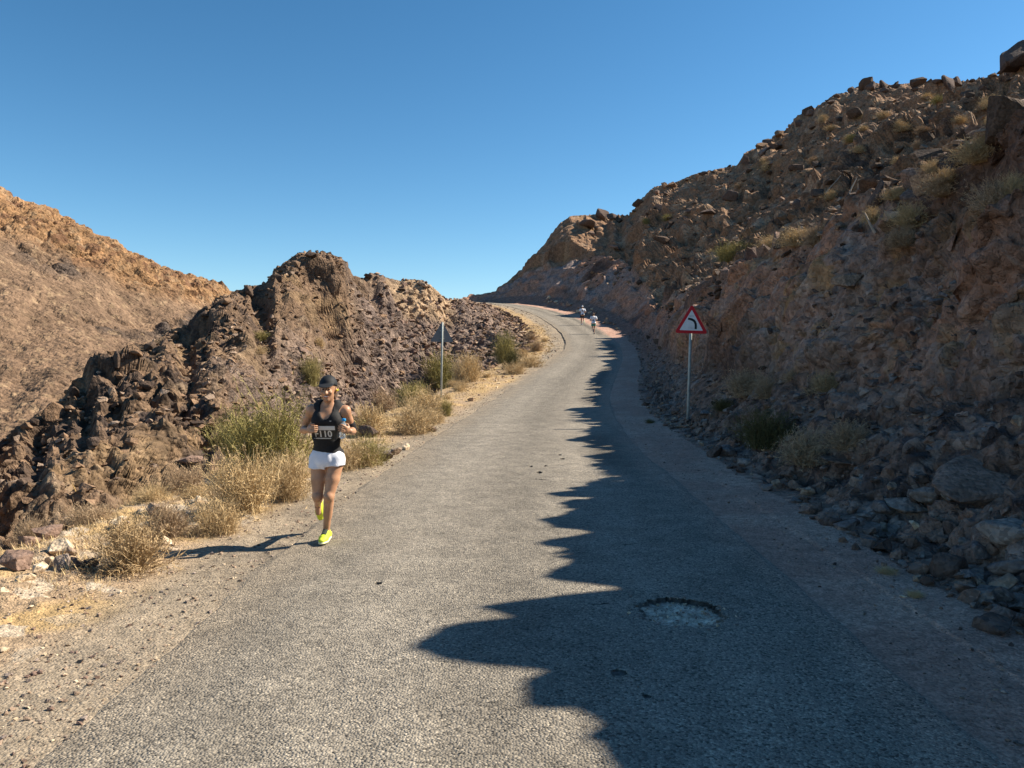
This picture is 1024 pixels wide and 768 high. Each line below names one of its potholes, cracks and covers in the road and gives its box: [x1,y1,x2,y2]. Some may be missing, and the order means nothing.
pothole [622,591,744,630]
